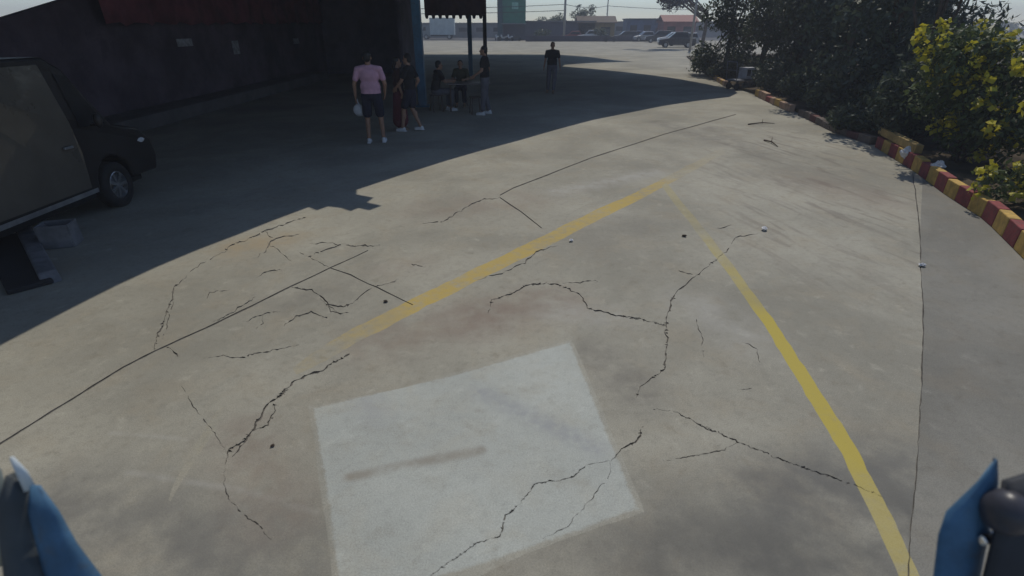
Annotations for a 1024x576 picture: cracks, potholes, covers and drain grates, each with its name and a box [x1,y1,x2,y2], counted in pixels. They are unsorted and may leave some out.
crack [478,233,758,396]
crack [653,408,882,497]
crack [190,217,422,326]
crack [154,278,185,357]
crack [182,353,350,540]
crack [431,429,642,576]
